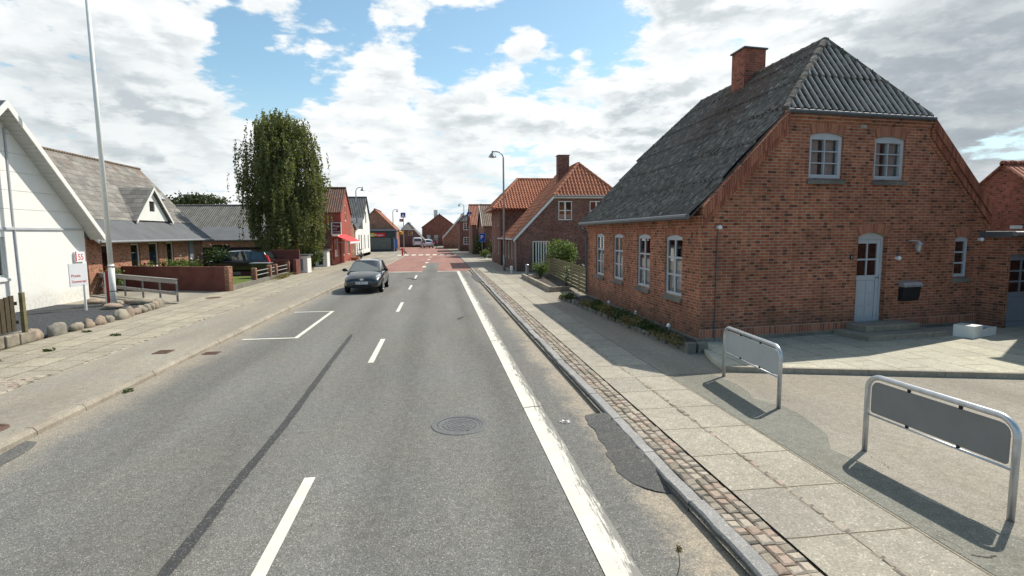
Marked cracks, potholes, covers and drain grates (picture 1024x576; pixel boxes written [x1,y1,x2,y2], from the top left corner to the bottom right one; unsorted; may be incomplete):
manhole cover [431,415,488,435]
